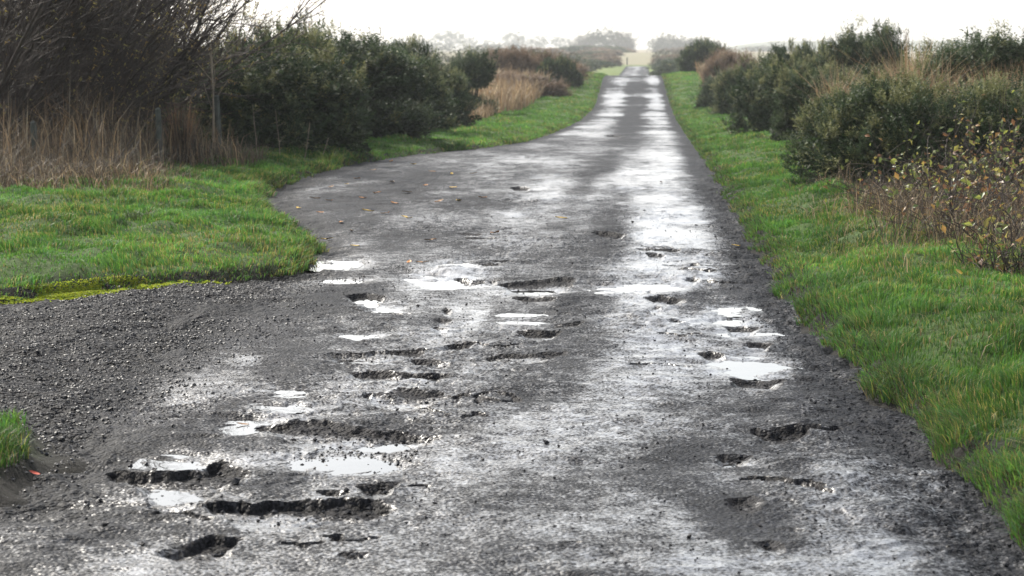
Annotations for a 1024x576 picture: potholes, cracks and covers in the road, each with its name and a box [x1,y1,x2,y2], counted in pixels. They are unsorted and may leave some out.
pothole [102,459,252,513]
pothole [750,423,811,445]
pothole [516,330,563,342]
pothole [196,497,396,535]
pothole [643,294,687,306]
pothole [713,453,754,467]
pothole [155,535,246,566]
pothole [255,418,442,457]
pothole [497,276,577,298]
pothole [729,377,787,394]
